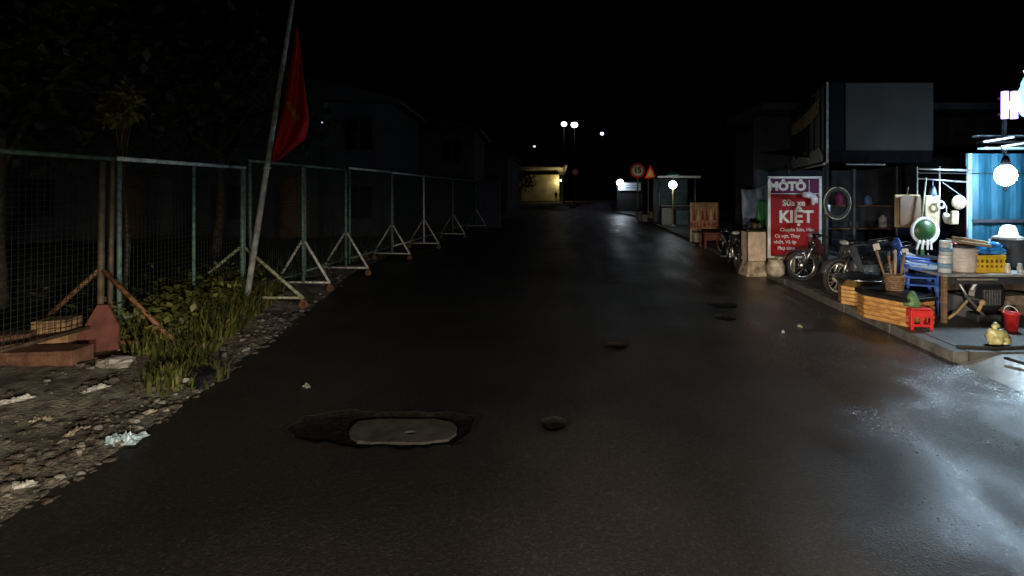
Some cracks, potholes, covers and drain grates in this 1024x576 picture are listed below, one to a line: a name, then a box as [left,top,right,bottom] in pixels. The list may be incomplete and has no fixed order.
pothole [604,341,629,350]
pothole [705,301,739,309]
manhole cover [349,419,457,445]
pothole [541,416,569,432]
pothole [283,408,482,451]
